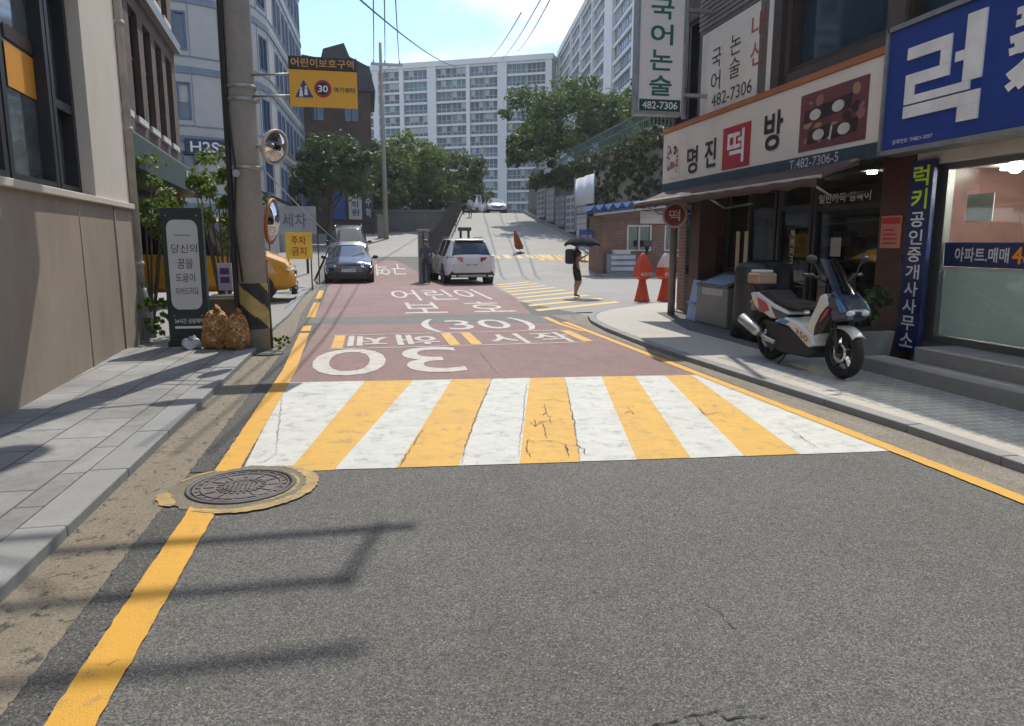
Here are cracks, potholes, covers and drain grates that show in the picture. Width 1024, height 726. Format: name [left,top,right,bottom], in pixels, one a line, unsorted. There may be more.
crack [651,705,769,726]
manhole cover [155,465,319,513]
crack [518,379,585,458]
